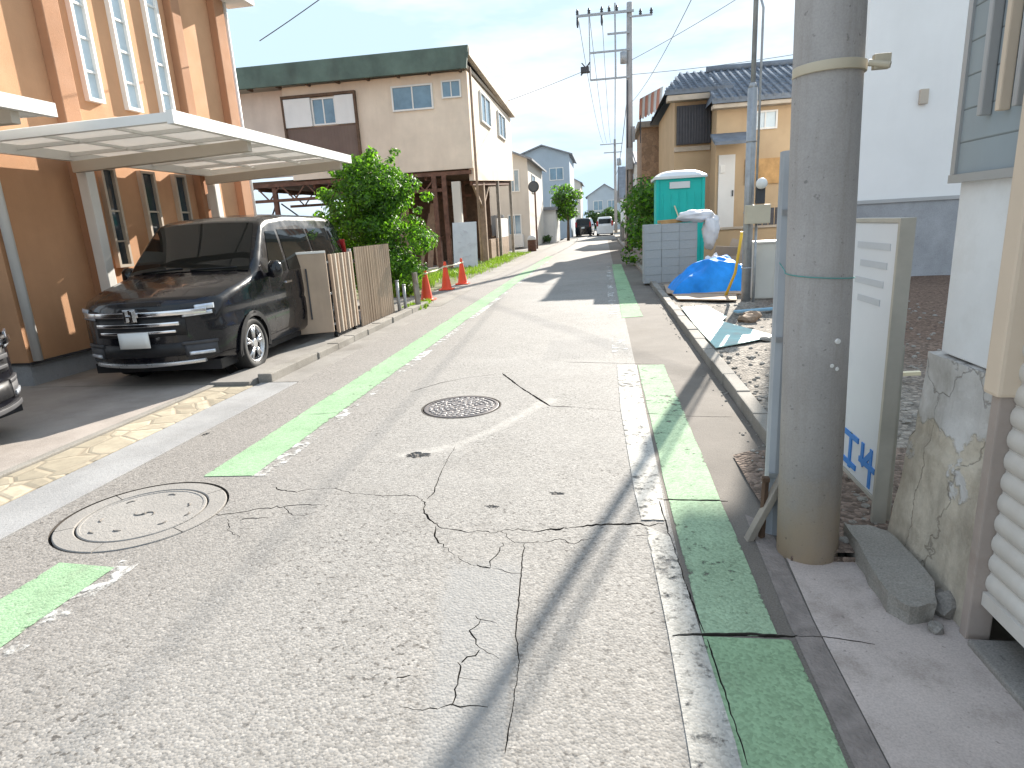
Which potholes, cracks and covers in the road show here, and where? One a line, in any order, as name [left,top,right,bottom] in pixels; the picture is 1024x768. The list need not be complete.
crack [216,447,823,763]
manhole cover [48,482,229,554]
manhole cover [421,396,501,419]
crack [502,373,614,411]
